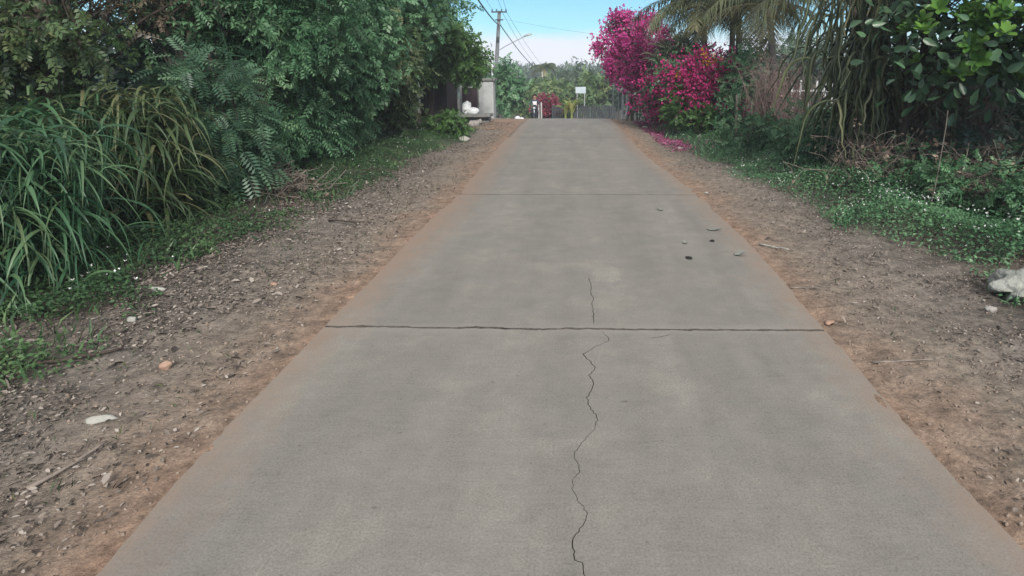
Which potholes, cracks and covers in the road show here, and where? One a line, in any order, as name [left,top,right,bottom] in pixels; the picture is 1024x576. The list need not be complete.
crack [572,336,609,576]
